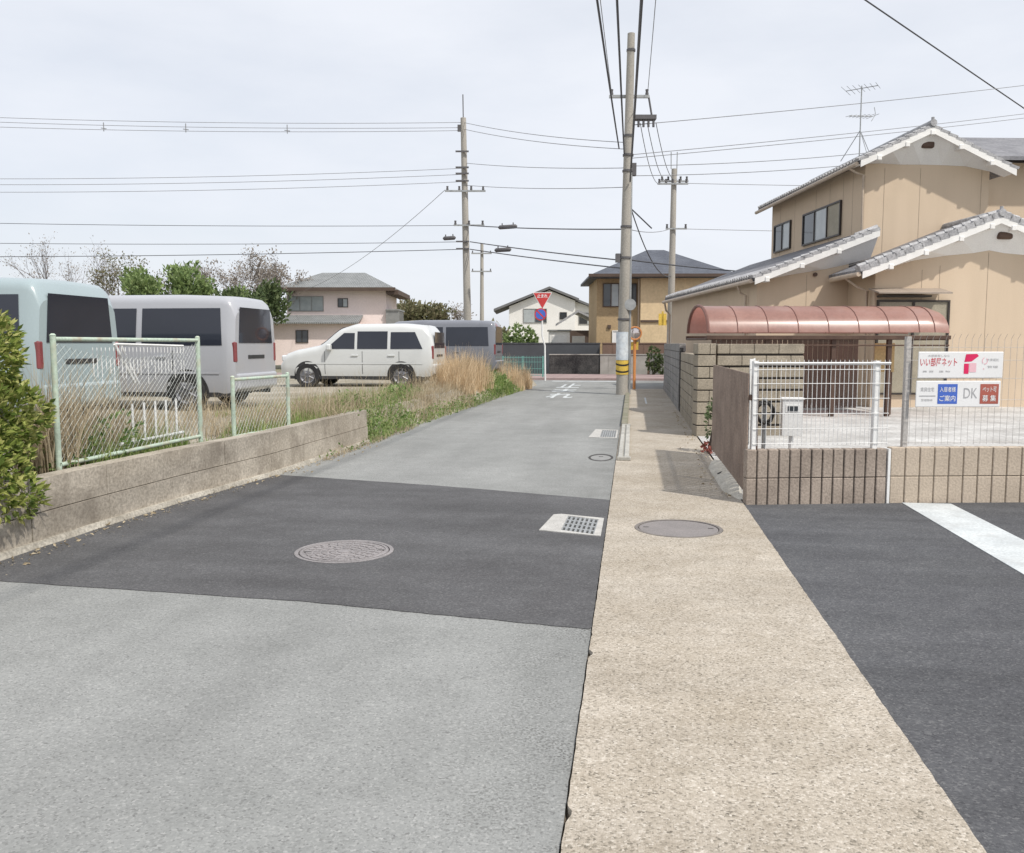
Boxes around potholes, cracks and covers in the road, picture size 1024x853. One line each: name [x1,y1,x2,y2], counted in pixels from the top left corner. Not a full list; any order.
manhole cover [294,540,394,563]
manhole cover [635,519,723,538]
